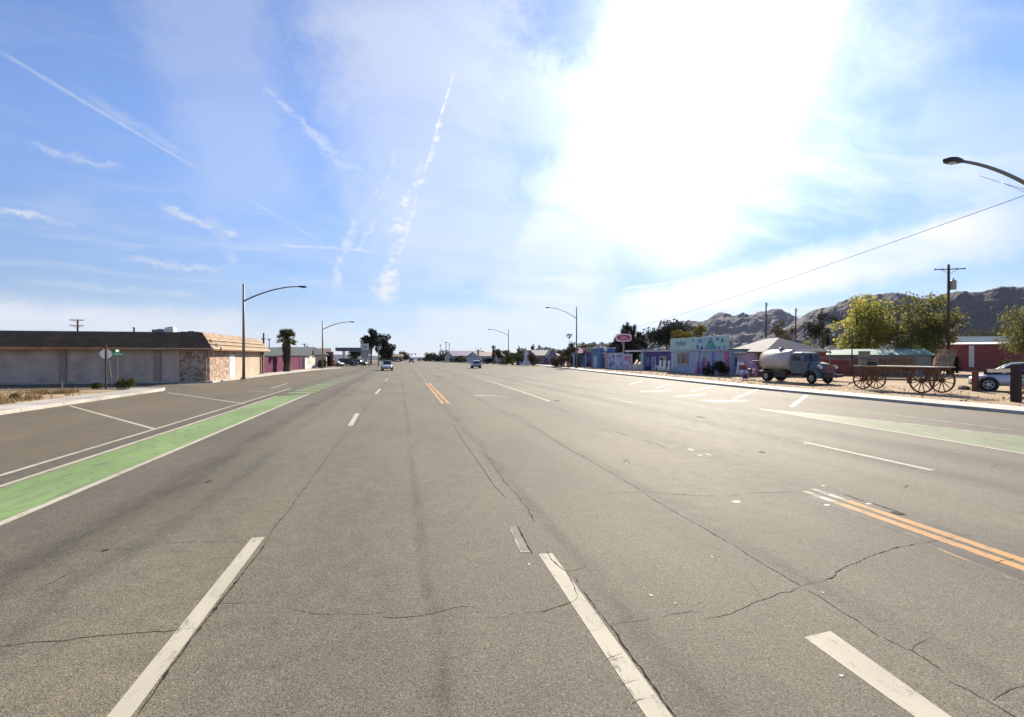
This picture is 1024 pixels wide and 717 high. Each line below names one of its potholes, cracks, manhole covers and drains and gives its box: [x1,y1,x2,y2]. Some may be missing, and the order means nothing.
crack [481,414,1022,717]
crack [0,539,514,717]
